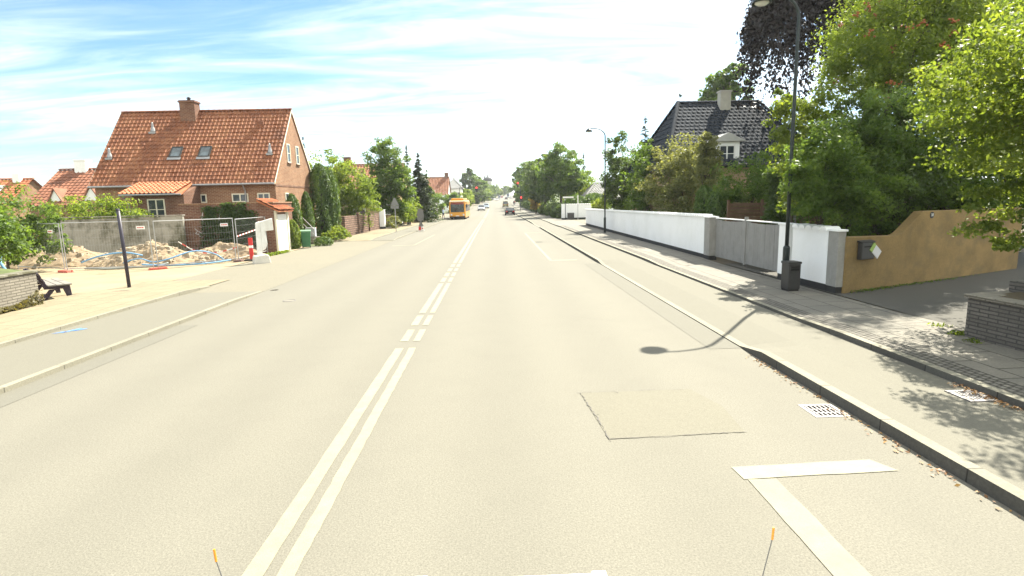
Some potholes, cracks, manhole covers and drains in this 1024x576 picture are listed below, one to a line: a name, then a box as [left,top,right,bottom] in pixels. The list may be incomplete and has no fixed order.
drain grate [944,389,1000,402]
drain grate [798,404,852,418]
